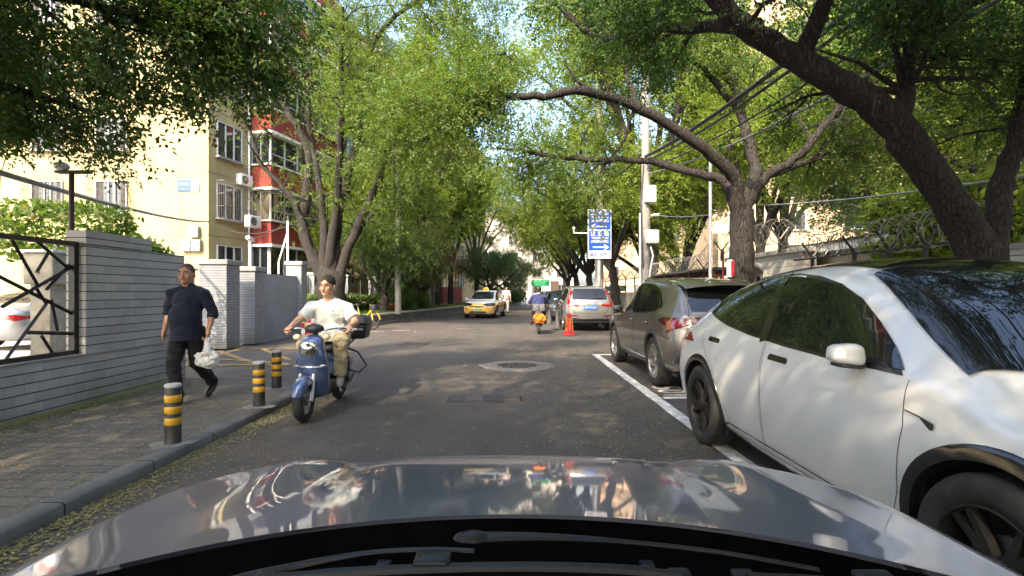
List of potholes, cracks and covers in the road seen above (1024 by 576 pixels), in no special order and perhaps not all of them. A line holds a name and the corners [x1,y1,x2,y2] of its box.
manhole cover [478,361,555,372]
